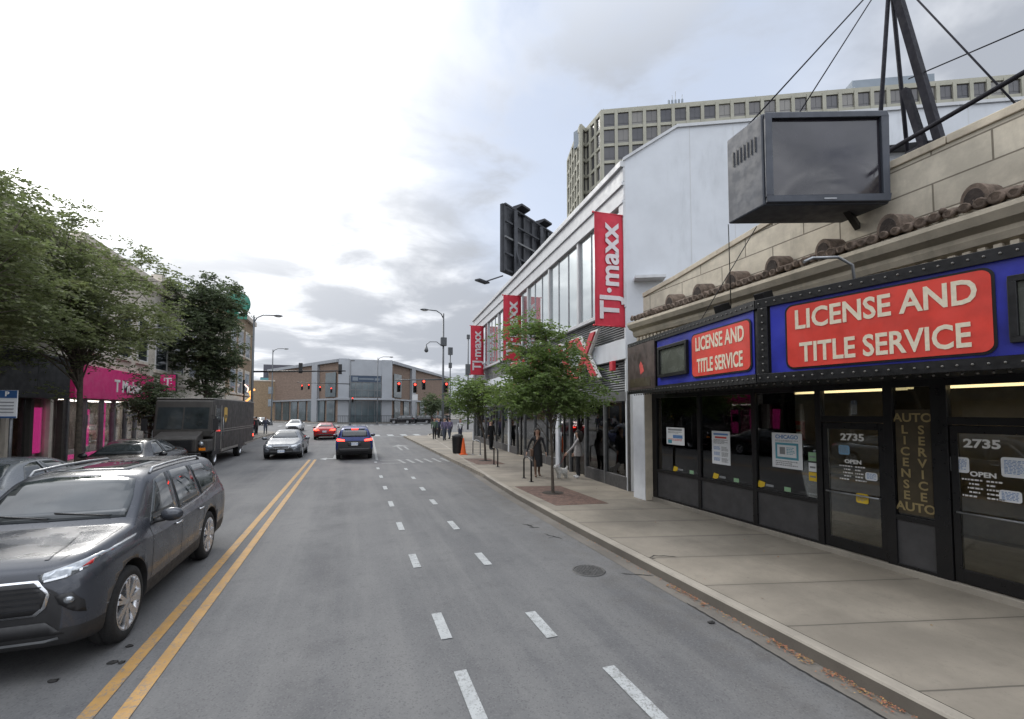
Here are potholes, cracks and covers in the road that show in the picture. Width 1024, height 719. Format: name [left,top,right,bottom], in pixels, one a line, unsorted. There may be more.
manhole cover [572,565,606,577]
